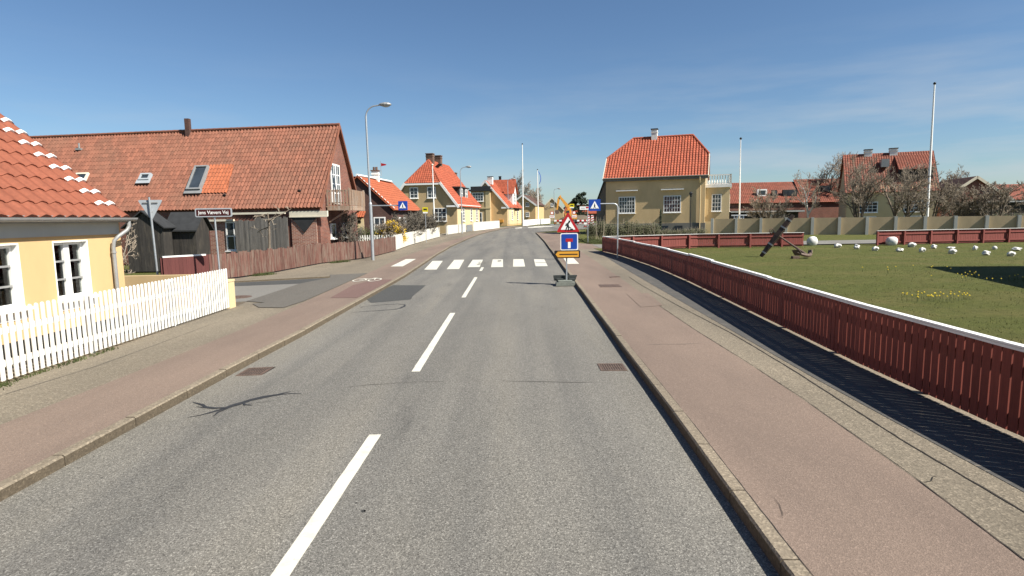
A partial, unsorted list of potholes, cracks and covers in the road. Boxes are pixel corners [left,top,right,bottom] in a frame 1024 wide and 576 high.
drain grate [597,363,628,371]
drain grate [235,367,275,376]
